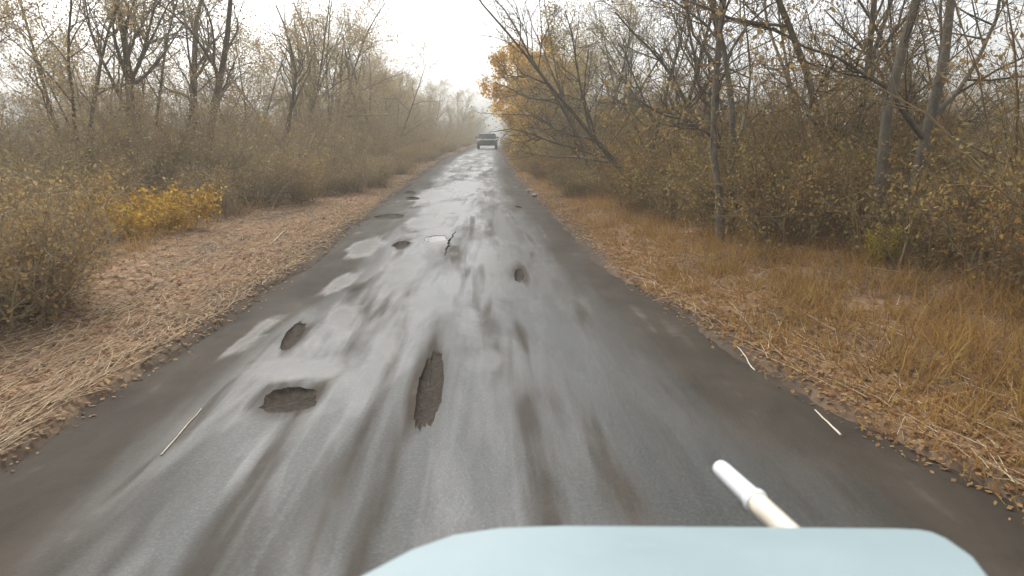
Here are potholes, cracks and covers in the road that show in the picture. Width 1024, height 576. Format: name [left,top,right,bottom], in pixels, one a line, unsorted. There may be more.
pothole [259,387,318,413]
pothole [514,268,524,283]
pothole [413,349,444,431]
pothole [279,321,306,351]
pothole [424,235,448,243]
pothole [392,241,410,249]
